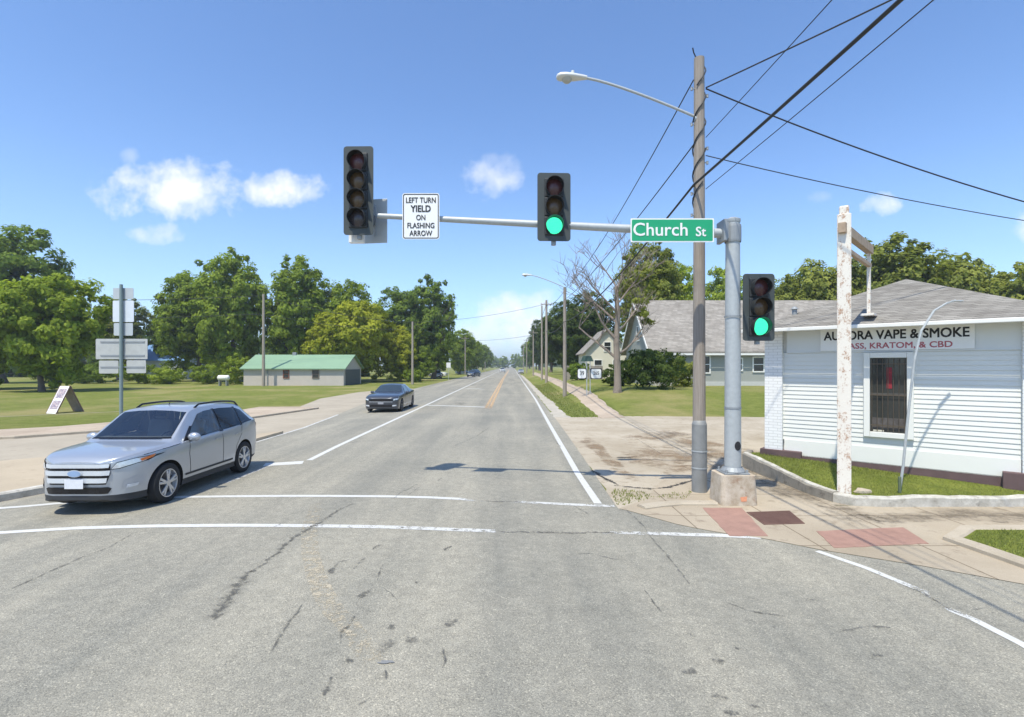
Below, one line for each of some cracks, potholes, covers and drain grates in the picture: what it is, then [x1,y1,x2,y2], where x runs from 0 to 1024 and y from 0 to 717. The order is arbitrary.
crack [211,511,337,619]
